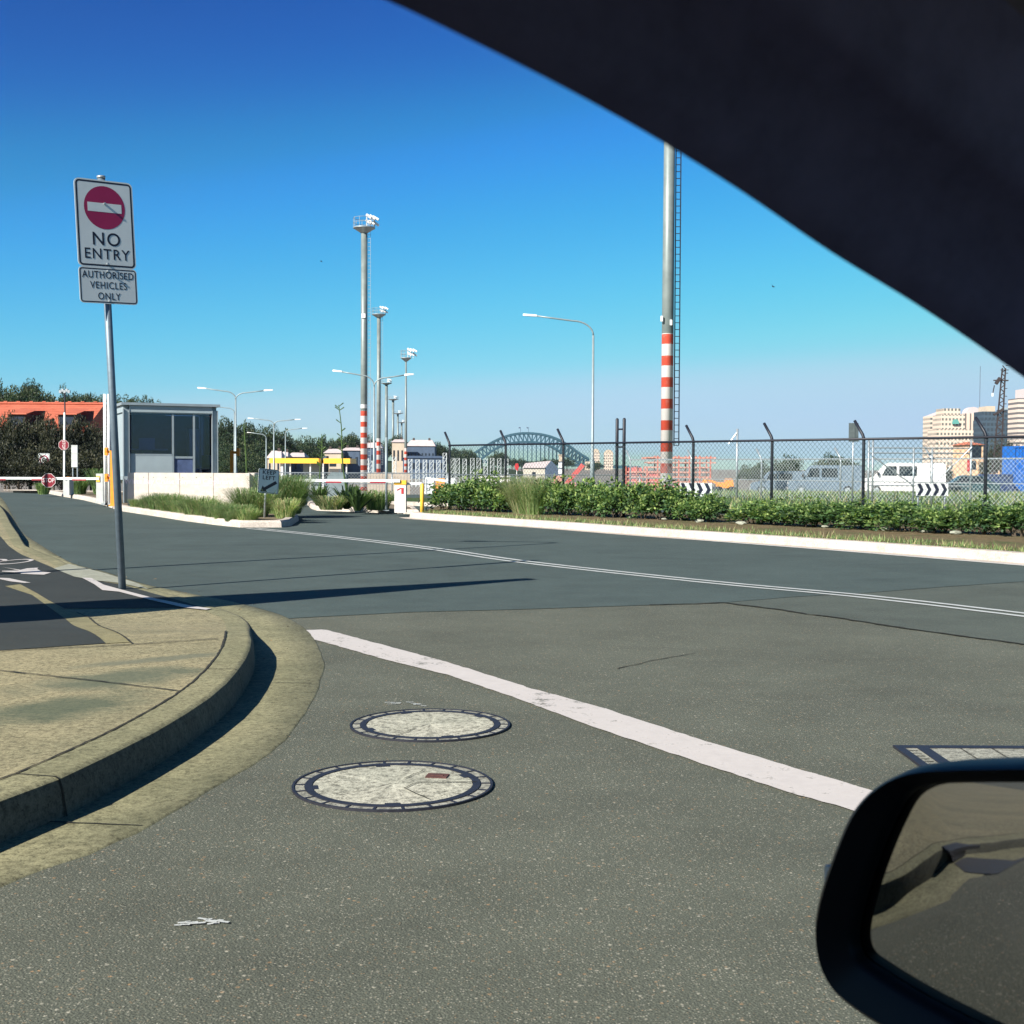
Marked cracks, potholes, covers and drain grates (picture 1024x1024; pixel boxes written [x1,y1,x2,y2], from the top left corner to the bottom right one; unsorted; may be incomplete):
manhole cover [350,708,510,743]
manhole cover [291,760,493,813]
